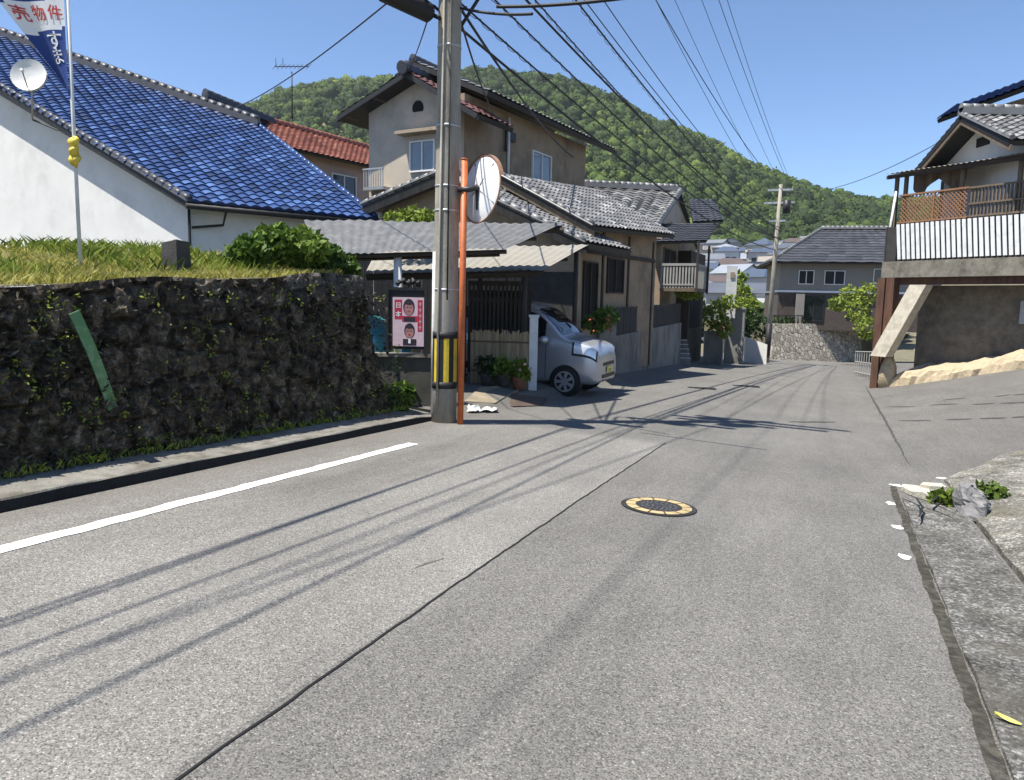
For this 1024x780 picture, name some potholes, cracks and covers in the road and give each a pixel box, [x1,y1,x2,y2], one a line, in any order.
manhole cover [621,497,697,516]
